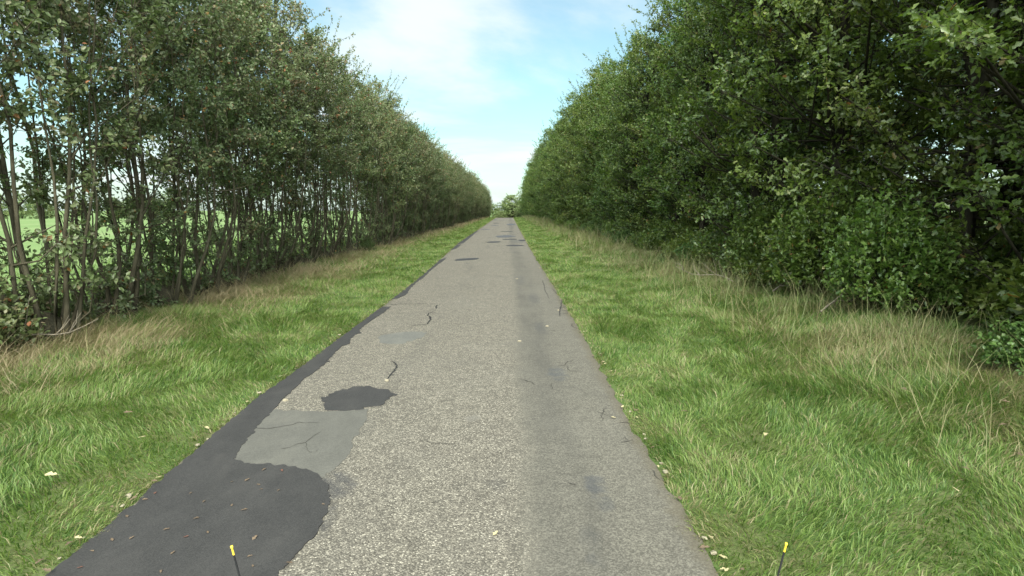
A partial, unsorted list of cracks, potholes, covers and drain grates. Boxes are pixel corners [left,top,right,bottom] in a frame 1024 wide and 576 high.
crack [264,422,321,451]
